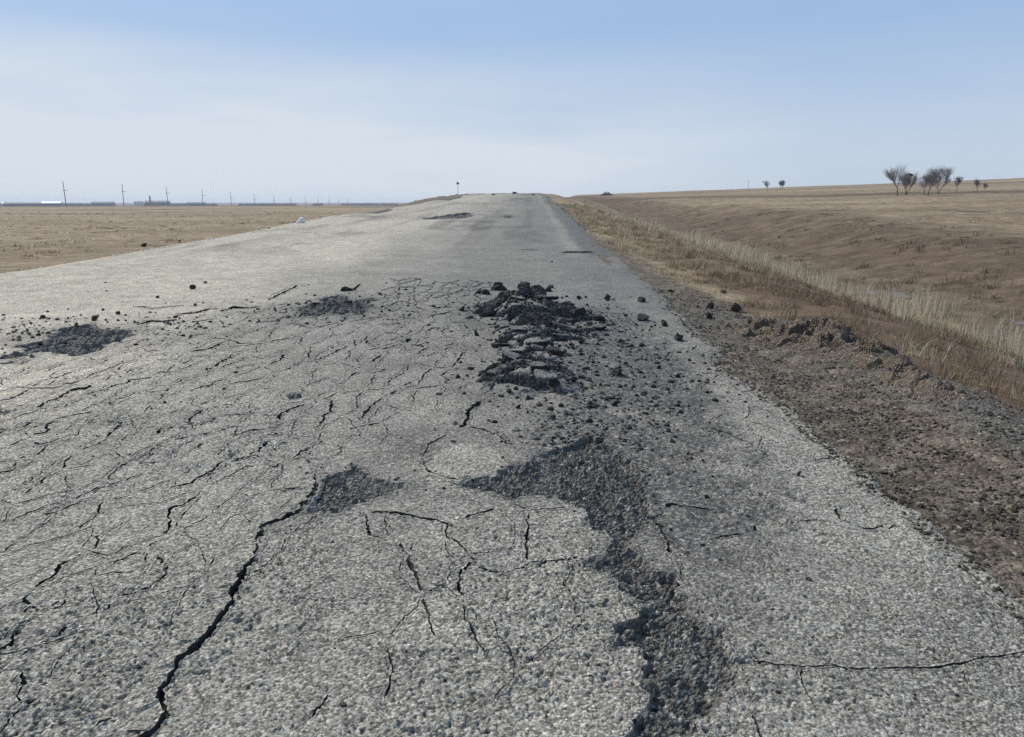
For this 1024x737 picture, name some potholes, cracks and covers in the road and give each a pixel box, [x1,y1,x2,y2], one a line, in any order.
pothole [423,432,749,737]
crack [0,277,591,737]
pothole [0,323,146,368]
